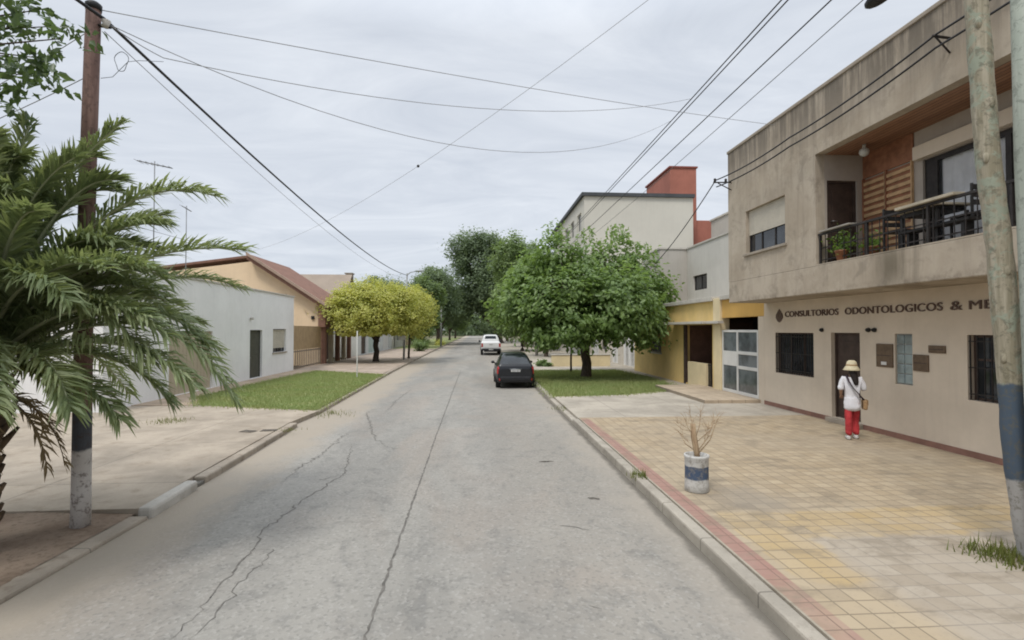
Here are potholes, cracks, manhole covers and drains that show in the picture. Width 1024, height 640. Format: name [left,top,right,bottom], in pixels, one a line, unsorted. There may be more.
crack [172,432,353,638]
